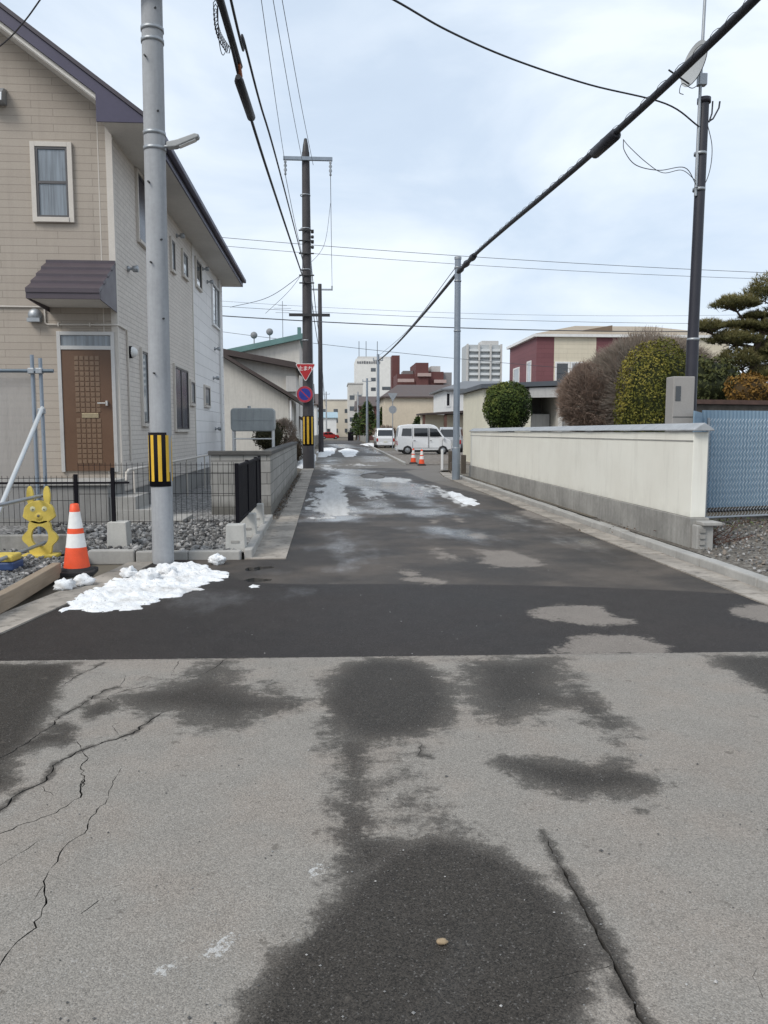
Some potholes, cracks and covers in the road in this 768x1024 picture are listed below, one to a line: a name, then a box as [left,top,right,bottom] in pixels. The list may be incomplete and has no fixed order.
crack [543,836,645,1024]
crack [0,660,223,758]
crack [0,712,164,965]
